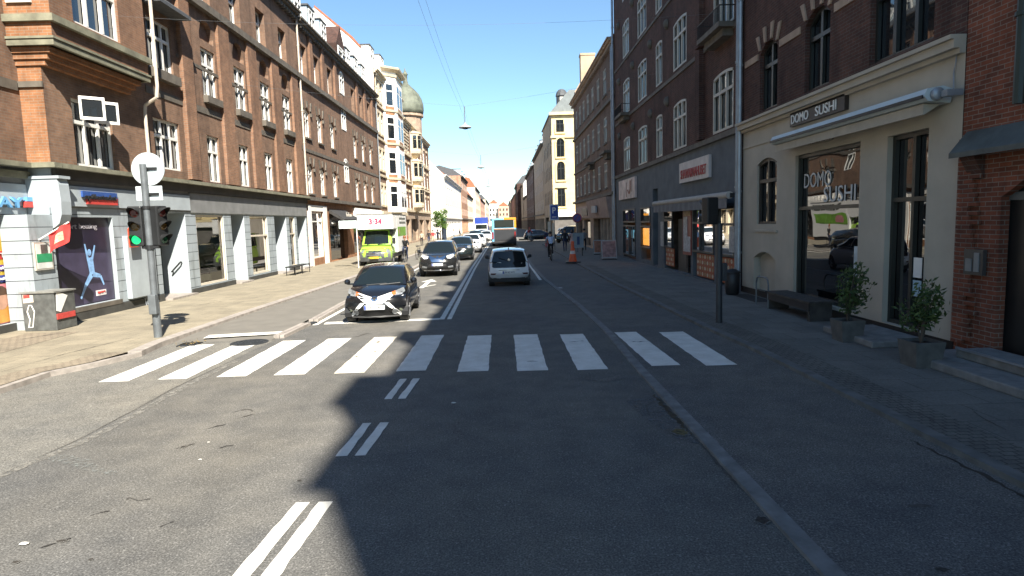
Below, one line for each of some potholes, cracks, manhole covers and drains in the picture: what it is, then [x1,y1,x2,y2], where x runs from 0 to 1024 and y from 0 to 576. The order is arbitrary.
pothole [752,516,772,526]
crack [911,440,1024,497]
